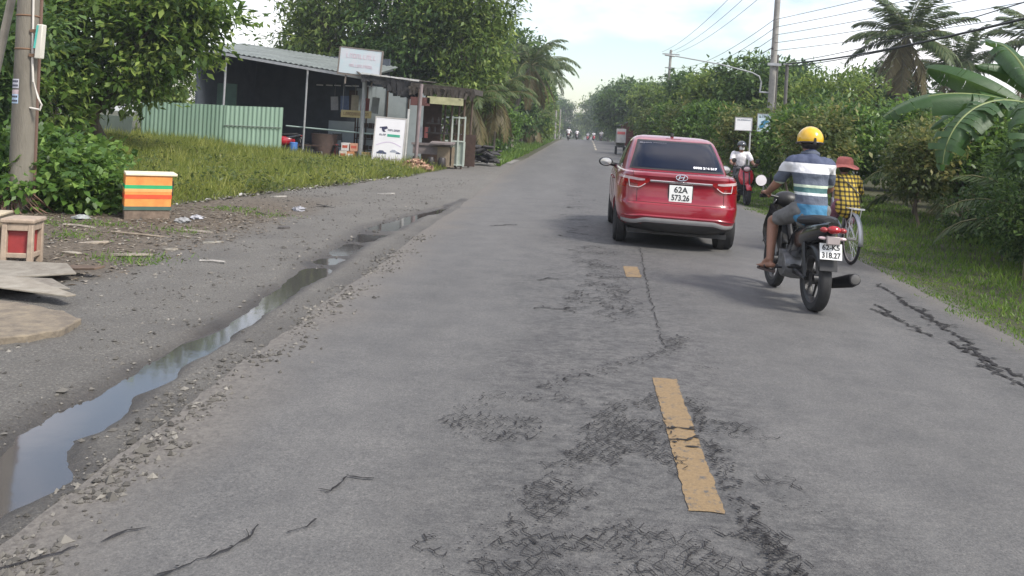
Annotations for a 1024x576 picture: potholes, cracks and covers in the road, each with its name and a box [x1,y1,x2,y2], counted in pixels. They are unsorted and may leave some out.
crack [412,392,822,576]
crack [870,283,1024,385]
crack [318,474,374,491]
crack [0,527,145,569]
crack [533,179,691,389]
crack [157,518,317,576]
